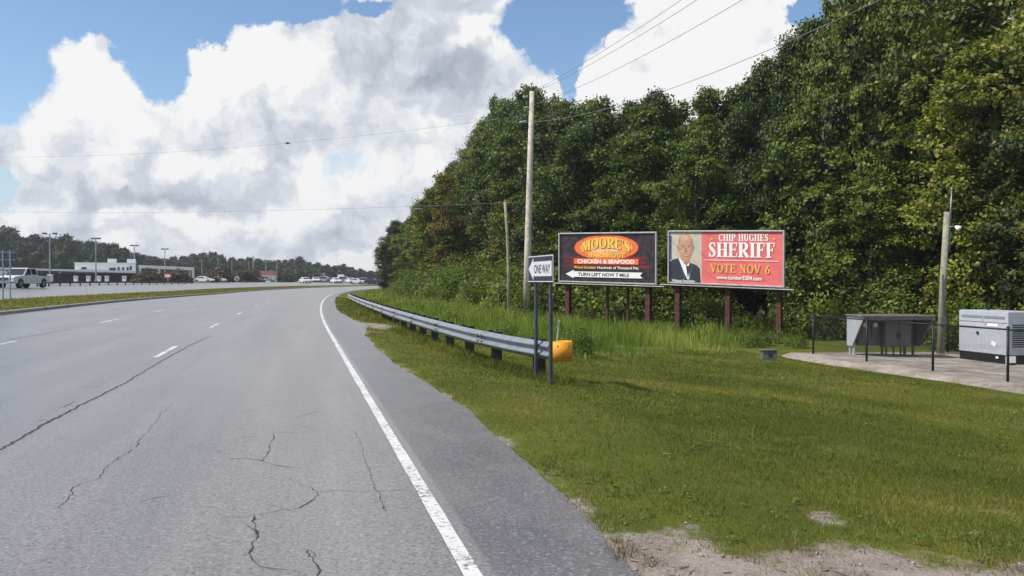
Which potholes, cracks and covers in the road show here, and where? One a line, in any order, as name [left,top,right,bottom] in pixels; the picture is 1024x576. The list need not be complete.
crack [217,411,389,572]
crack [58,404,172,508]
